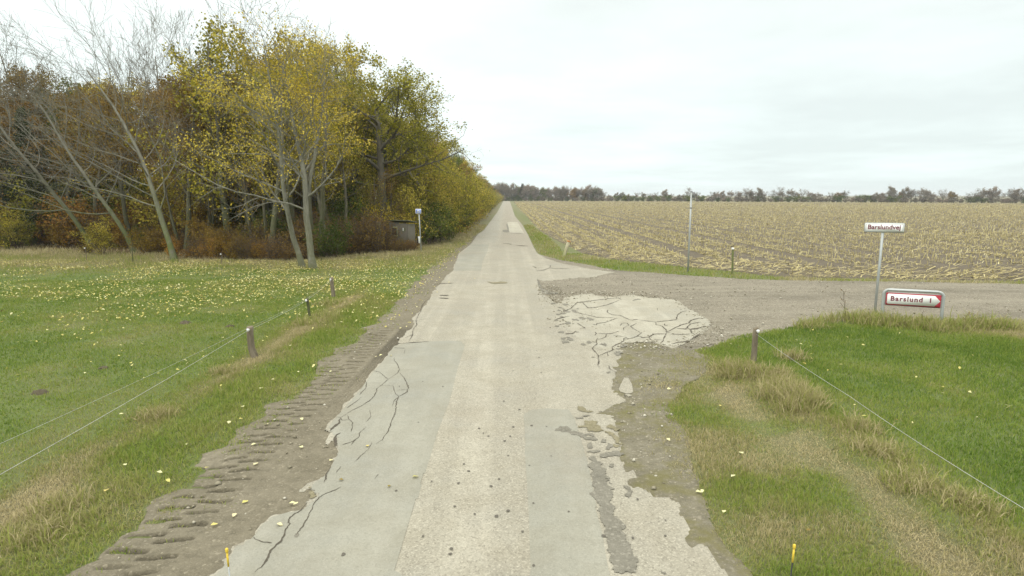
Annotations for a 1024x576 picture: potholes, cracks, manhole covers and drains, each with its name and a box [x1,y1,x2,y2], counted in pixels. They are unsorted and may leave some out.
crack [254,359,409,568]
pothole [587,456,639,573]
pothole [555,426,598,440]
crack [556,298,706,370]
pothole [578,420,603,432]
